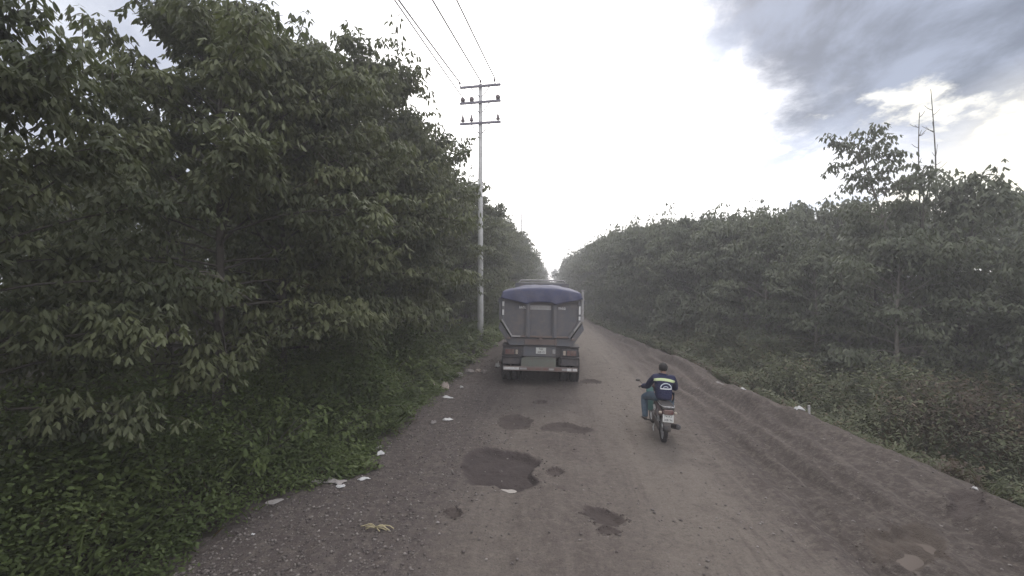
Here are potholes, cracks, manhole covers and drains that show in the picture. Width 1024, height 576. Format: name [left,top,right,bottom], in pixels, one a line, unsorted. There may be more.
pothole [595,525,623,536]
pothole [495,413,537,432]
pothole [443,506,464,520]
pothole [574,504,632,530]
pothole [533,421,599,436]
pothole [449,443,549,500]
pothole [545,466,566,478]
